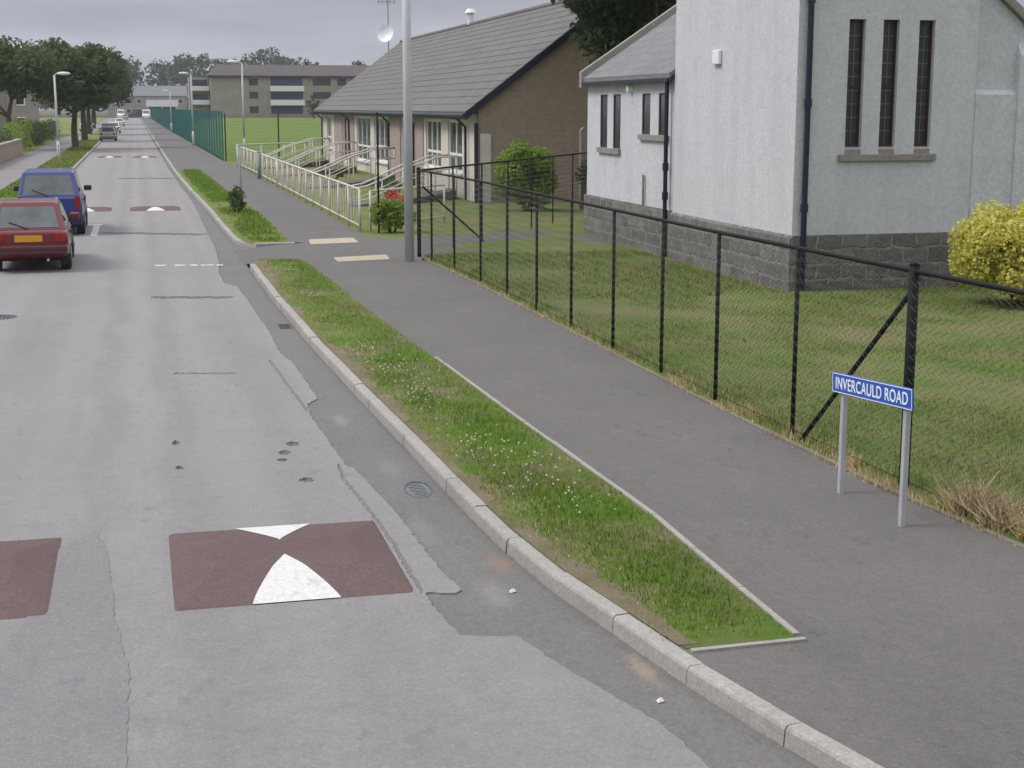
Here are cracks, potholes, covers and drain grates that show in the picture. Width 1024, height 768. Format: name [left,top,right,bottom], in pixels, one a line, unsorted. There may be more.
crack [337,464,423,593]
